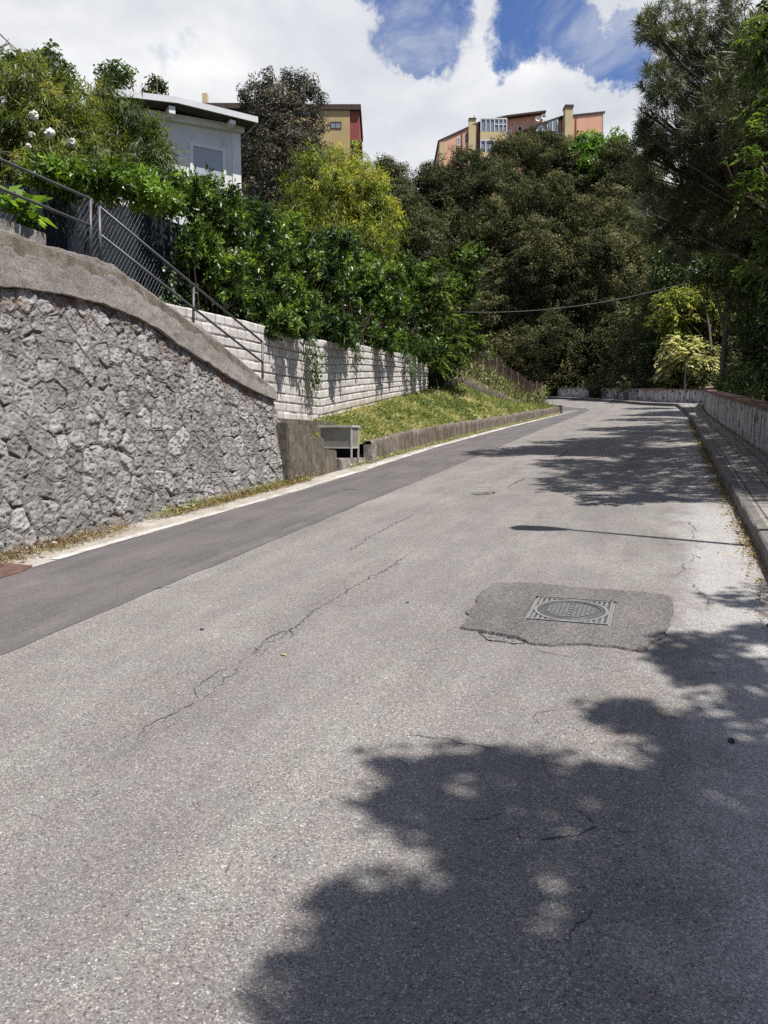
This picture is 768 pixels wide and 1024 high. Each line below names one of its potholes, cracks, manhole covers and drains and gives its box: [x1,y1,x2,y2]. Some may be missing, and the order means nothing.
crack [477,810,623,839]
crack [565,910,593,942]
manhole cover [526,597,613,626]
manhole cover [0,563,33,578]
crack [138,555,407,736]
